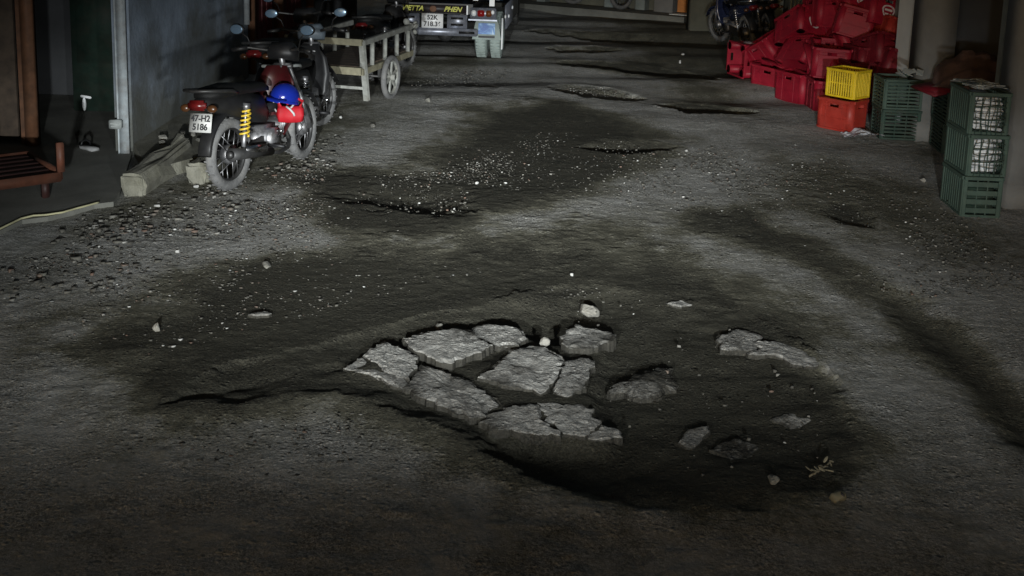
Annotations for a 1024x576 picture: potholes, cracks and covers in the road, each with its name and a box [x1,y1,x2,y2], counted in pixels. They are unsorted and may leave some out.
pothole [543,84,649,102]
pothole [648,102,761,116]
pothole [145,283,872,514]
pothole [571,137,685,155]
pothole [309,180,487,219]
pothole [817,201,880,229]
